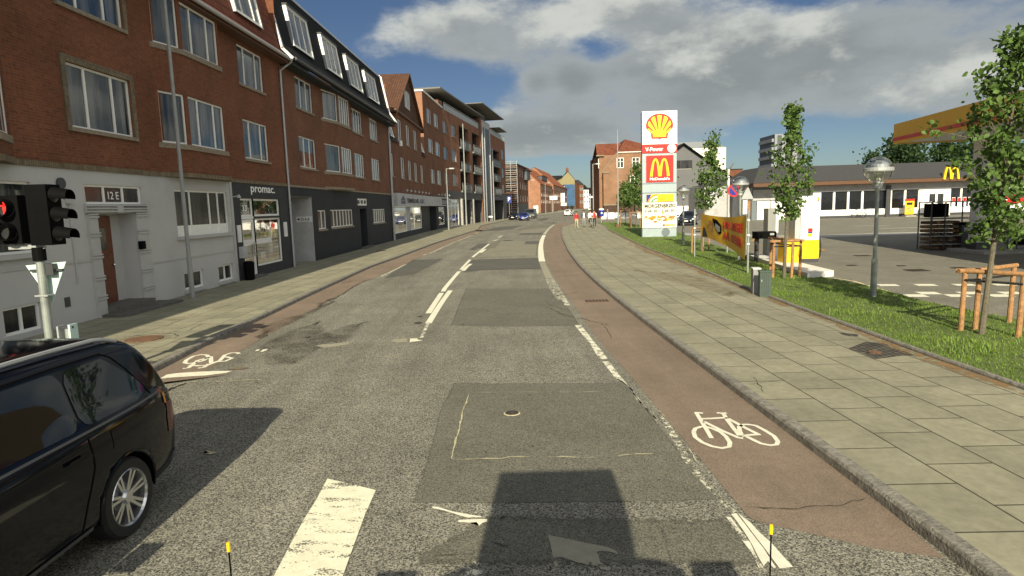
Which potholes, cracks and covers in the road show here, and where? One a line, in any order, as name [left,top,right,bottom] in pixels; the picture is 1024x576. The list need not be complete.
crack [749,498,866,509]
manhole cover [124,335,164,343]
